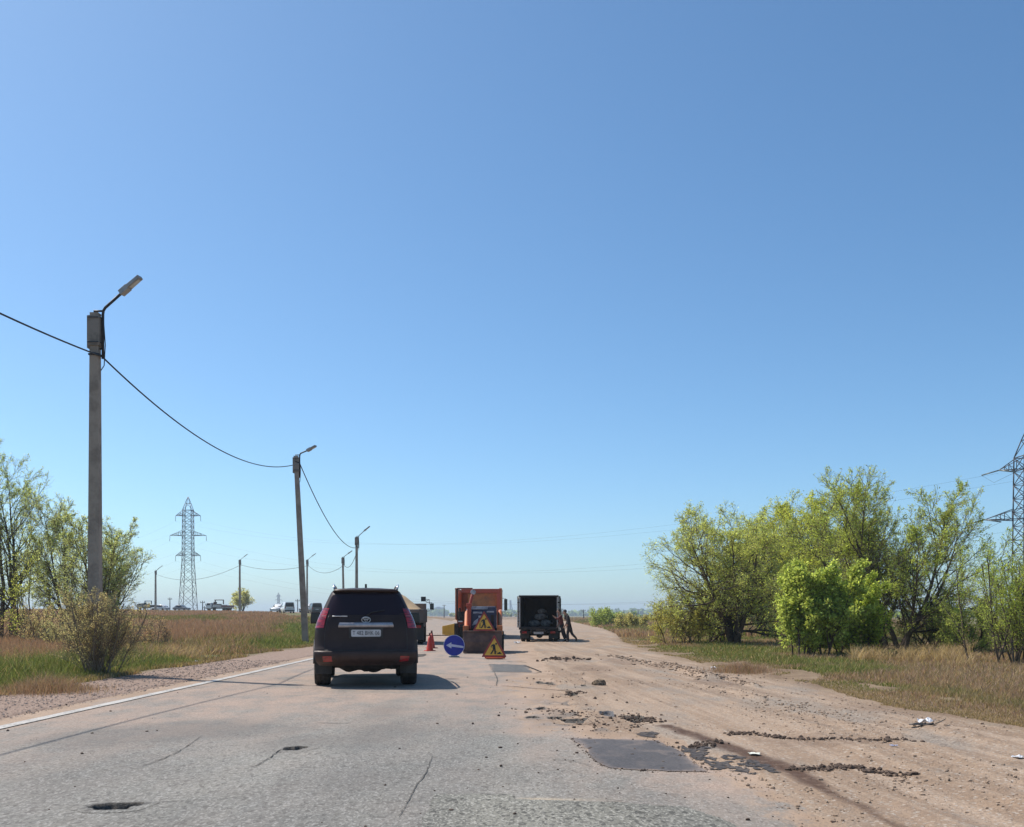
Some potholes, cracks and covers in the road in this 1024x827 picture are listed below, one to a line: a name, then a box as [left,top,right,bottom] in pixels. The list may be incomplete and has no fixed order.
crack [399,757,432,815]
pothole [551,717,598,725]
pothole [72,800,160,813]
